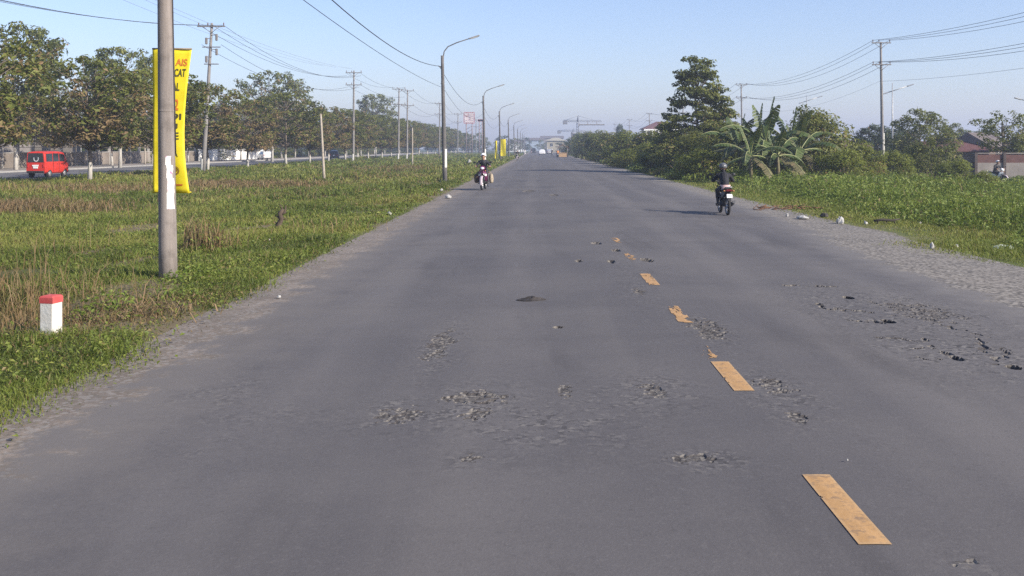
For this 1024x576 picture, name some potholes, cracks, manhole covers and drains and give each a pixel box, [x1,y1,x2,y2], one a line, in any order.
pothole [666,451,718,465]
pothole [418,325,460,365]
pothole [784,410,810,425]
pothole [868,297,980,326]
pothole [558,385,573,400]
pothole [681,317,743,346]
pothole [634,379,667,399]
pothole [751,375,801,398]
pothole [373,405,428,424]
pothole [435,389,515,406]
pothole [456,407,498,422]
pothole [457,453,483,462]
